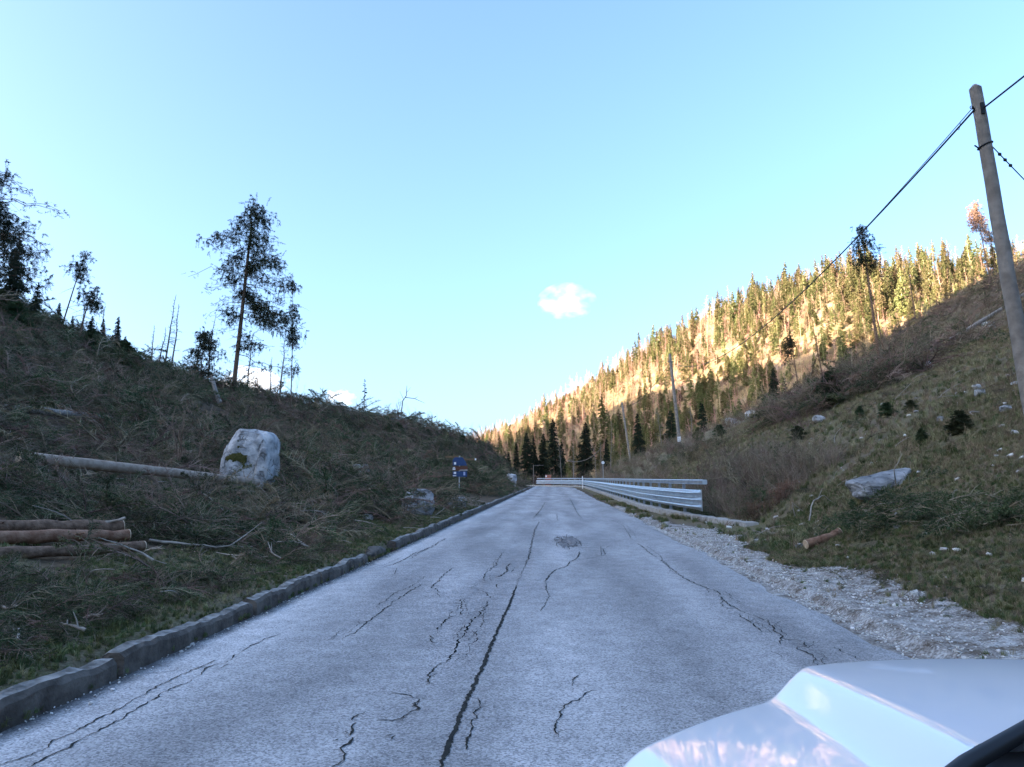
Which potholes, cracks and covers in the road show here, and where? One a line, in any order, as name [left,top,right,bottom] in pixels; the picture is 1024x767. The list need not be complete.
crack [0,633,281,767]
crack [331,499,606,767]
crack [617,521,870,665]
